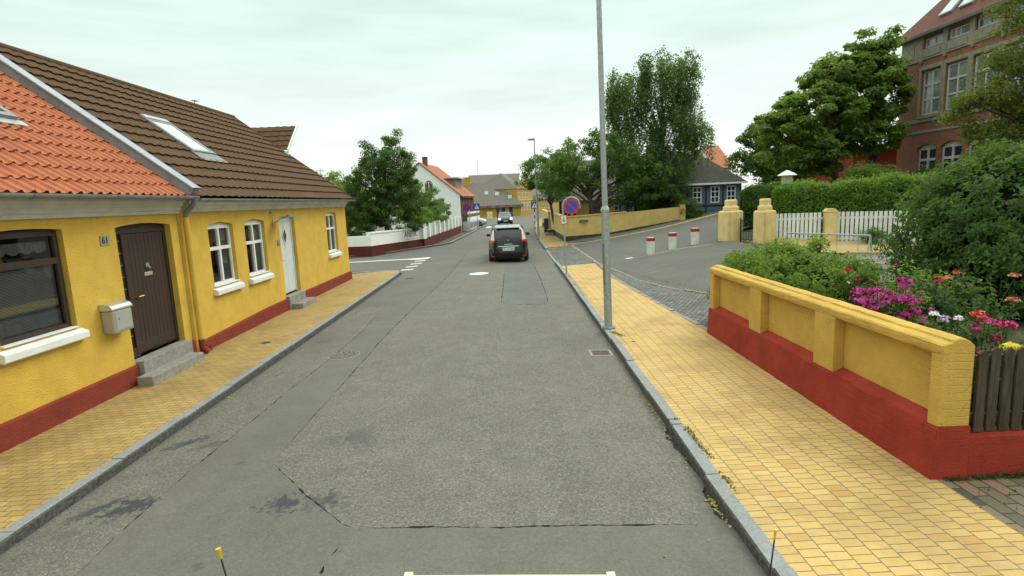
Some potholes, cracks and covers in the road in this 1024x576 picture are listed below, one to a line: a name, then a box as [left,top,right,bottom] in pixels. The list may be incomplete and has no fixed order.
manhole cover [328,351,360,360]
